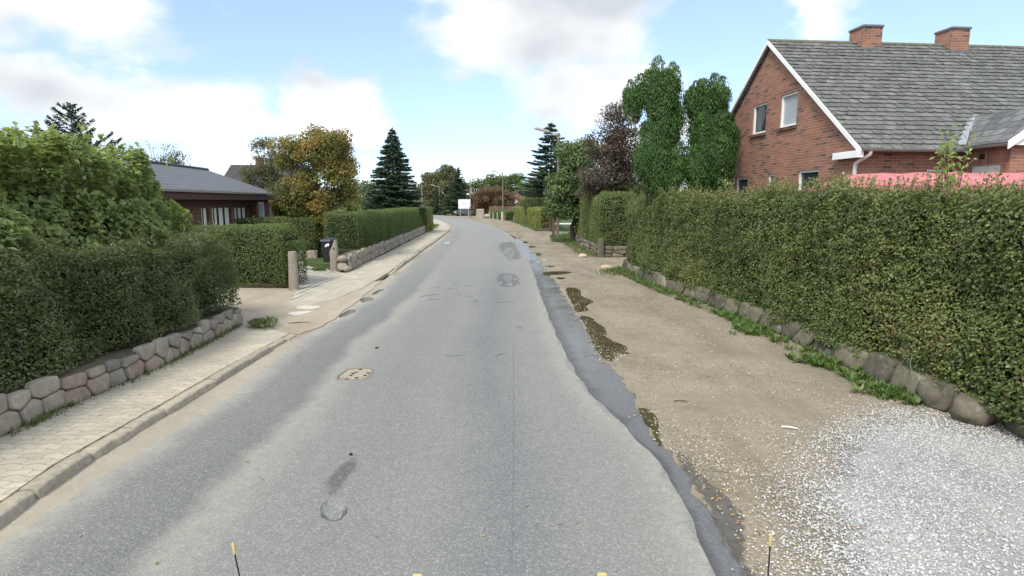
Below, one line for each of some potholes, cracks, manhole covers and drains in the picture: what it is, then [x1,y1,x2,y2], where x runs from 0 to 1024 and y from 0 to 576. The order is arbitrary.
pothole [320,497,348,521]
manhole cover [335,368,375,380]
